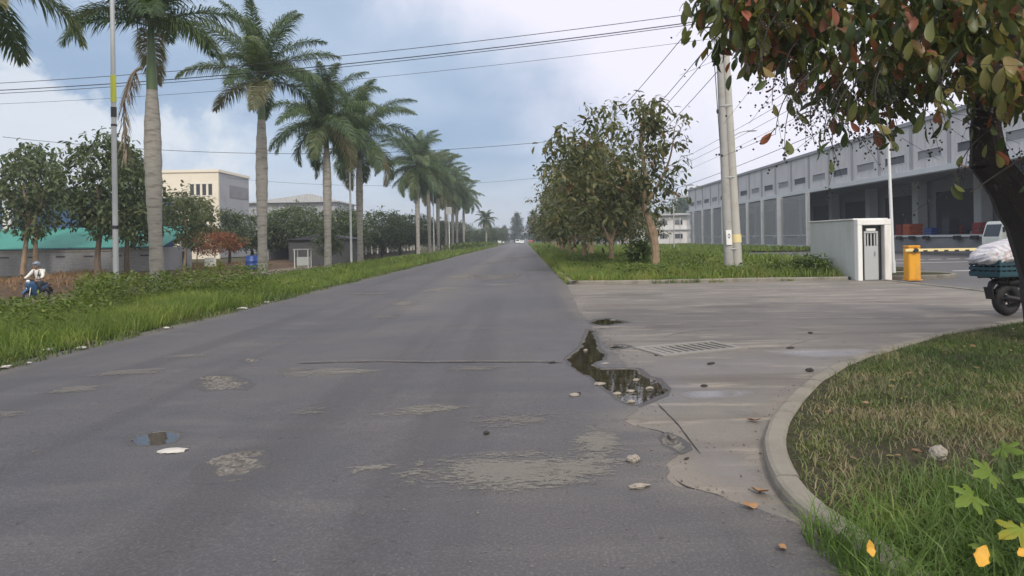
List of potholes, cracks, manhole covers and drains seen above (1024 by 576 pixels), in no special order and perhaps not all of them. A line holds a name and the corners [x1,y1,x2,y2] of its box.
pothole [564,329,671,407]
pothole [123,430,184,447]
pothole [658,432,693,454]
drain grate [633,340,748,357]
